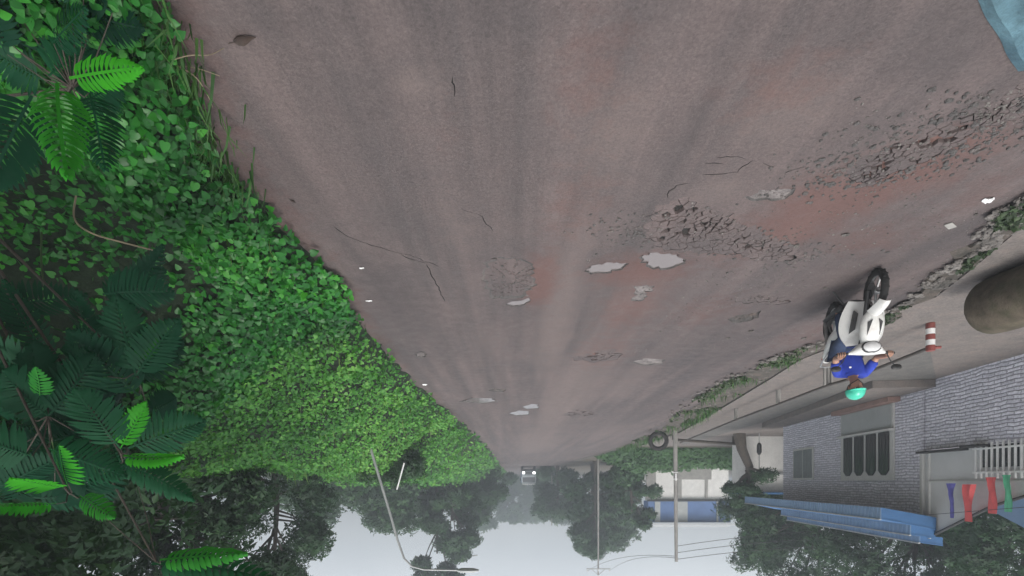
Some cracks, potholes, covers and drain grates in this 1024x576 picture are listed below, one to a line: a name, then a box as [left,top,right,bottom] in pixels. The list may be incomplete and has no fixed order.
crack [847,83,1024,189]
crack [334,227,445,301]
pothole [481,257,537,299]
crack [643,156,804,262]
